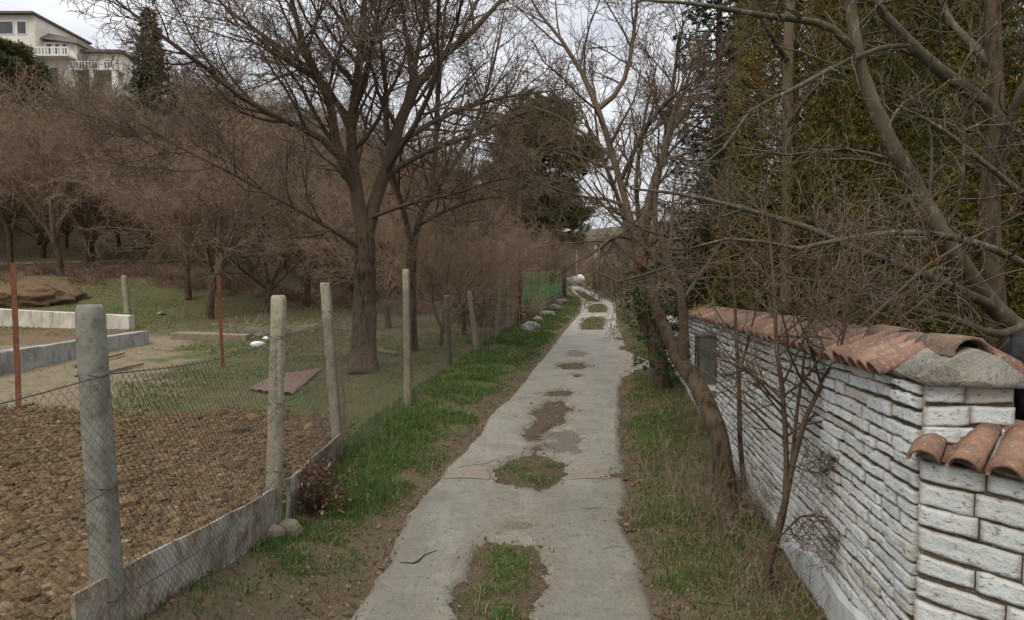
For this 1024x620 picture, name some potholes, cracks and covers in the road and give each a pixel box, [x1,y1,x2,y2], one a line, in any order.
pothole [578,316,607,330]
pothole [437,532,564,620]
pothole [588,304,608,313]
pothole [539,387,578,397]
pothole [513,397,582,443]
pothole [556,361,595,369]
pothole [482,448,580,494]
